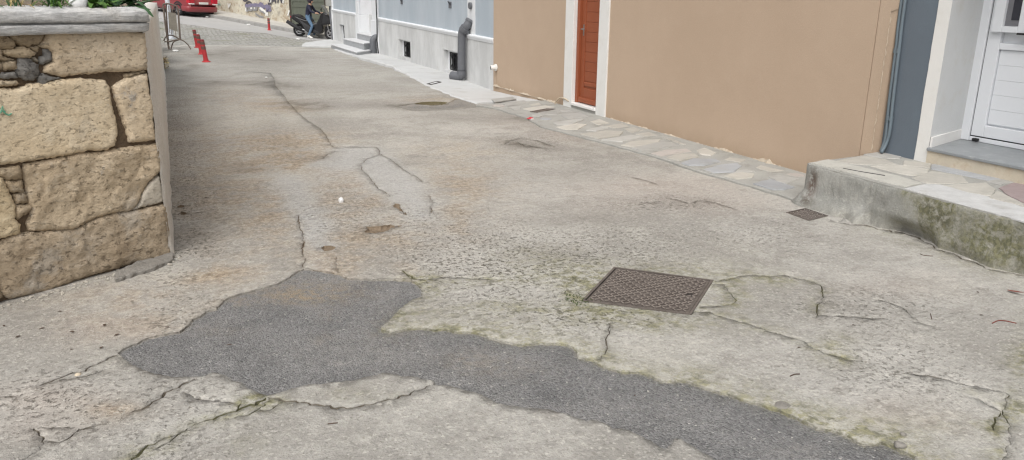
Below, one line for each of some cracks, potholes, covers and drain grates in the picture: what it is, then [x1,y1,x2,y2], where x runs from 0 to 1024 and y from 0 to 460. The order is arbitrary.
crack [33,427,91,450]
crack [131,386,427,460]
manhole cover [581,267,714,315]
crack [991,396,1010,460]
crack [133,379,195,412]
pothole [365,225,402,233]
